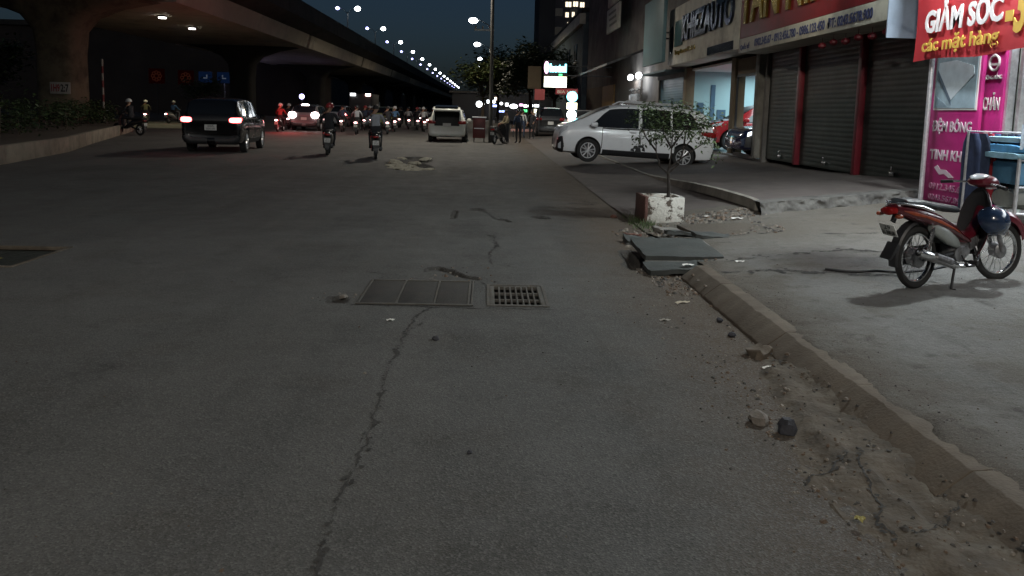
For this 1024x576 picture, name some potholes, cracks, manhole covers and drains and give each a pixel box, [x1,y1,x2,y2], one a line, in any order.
crack [310,270,563,576]
crack [473,209,509,266]
drain grate [487,284,550,307]
manhole cover [355,279,475,306]
crack [804,440,961,541]
pothole [384,156,435,171]
